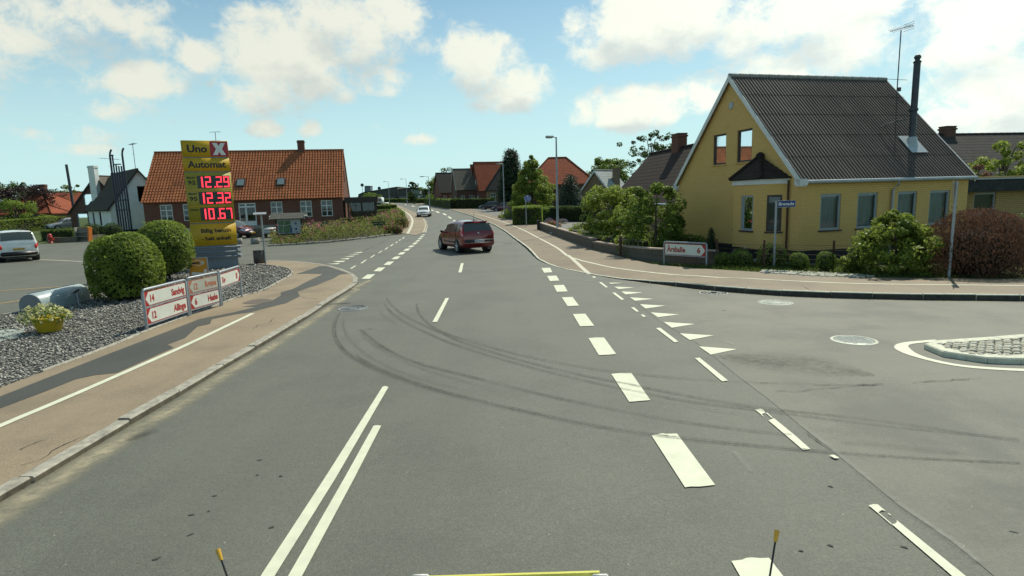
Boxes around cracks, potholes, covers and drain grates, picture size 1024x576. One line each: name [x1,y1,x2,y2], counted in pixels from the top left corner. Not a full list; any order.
manhole cover [830,335,879,346]
